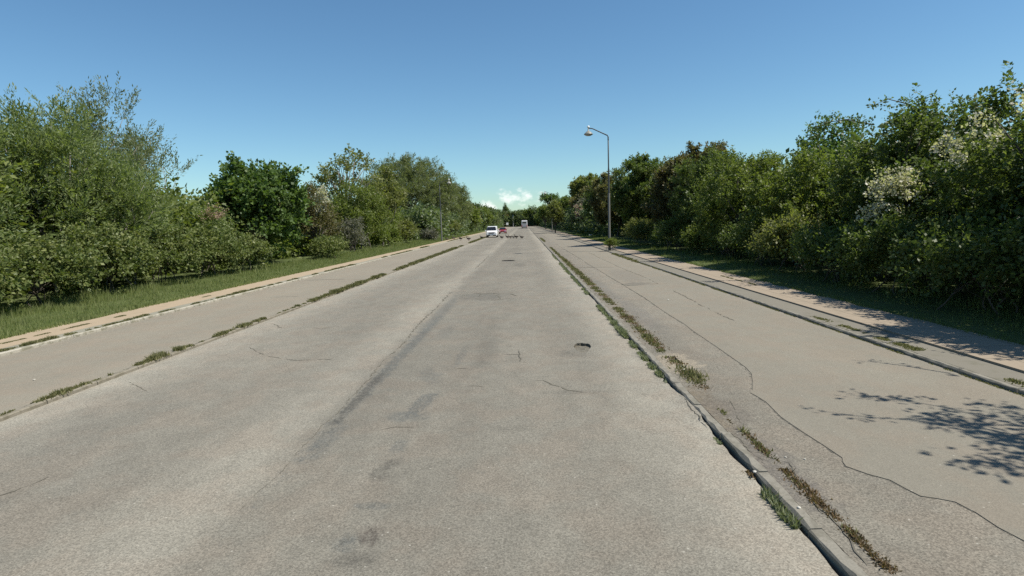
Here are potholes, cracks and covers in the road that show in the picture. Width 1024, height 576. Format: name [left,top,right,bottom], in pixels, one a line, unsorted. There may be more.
pothole [574,343,591,353]
crack [564,249,1013,565]
